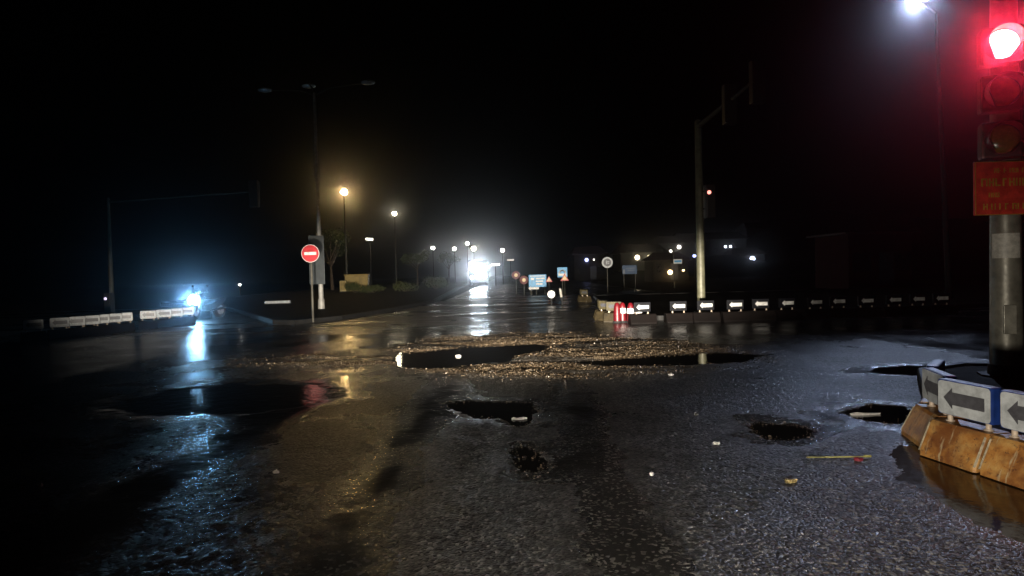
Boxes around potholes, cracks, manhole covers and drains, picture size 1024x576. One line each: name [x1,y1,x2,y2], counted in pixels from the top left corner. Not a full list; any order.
pothole [831,402,912,427]
pothole [741,420,827,443]
pothole [501,442,559,477]
pothole [439,399,544,428]
